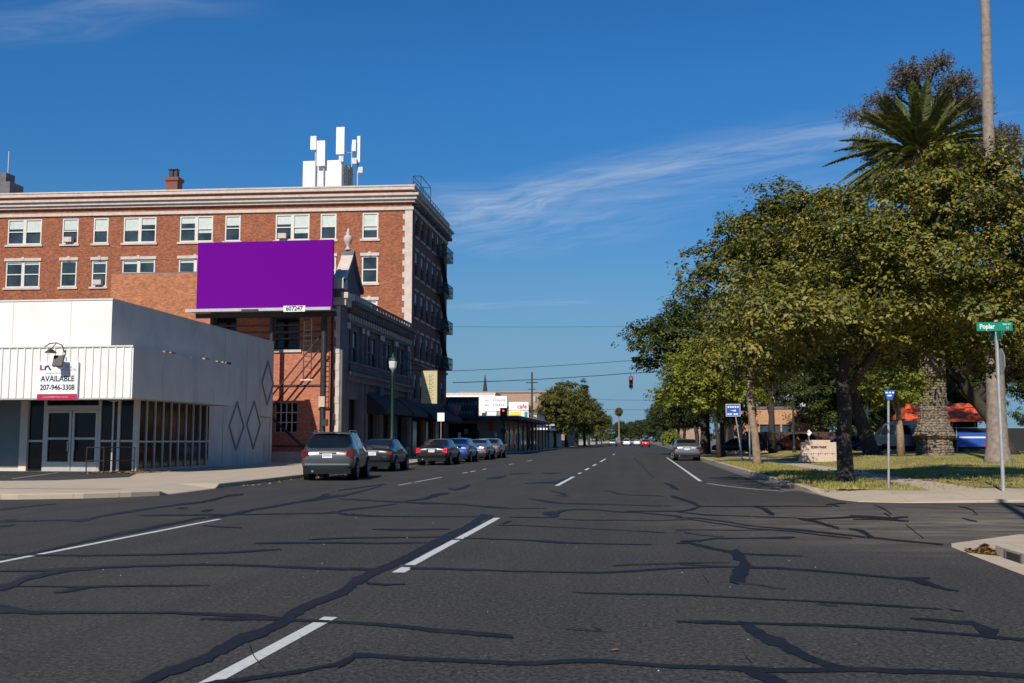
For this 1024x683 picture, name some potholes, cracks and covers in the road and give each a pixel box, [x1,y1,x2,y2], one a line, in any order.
crack [15,585,201,593]
crack [0,484,943,556]
crack [572,575,962,611]
